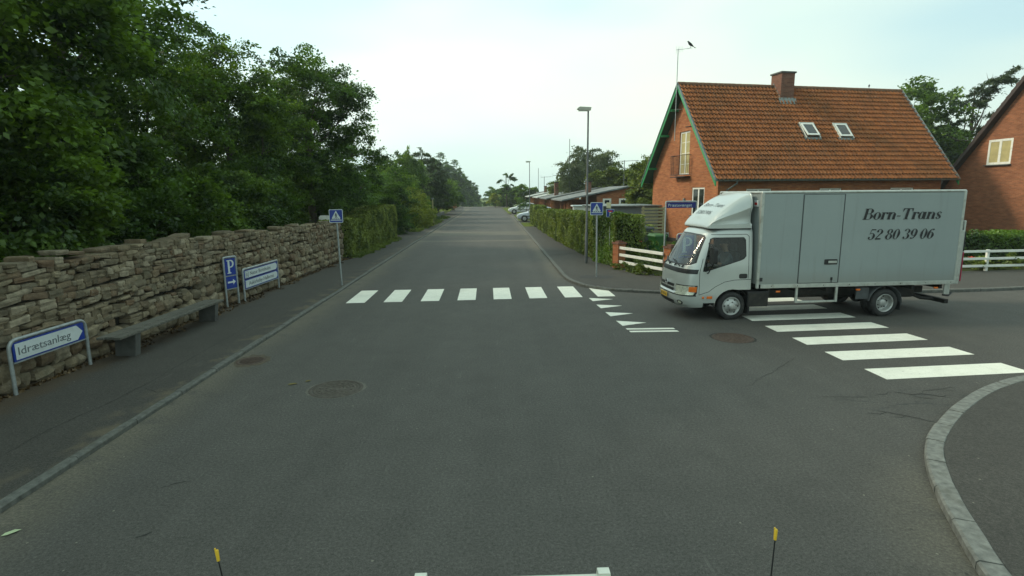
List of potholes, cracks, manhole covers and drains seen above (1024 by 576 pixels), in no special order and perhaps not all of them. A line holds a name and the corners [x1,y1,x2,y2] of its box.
manhole cover [305,380,367,399]
crack [872,387,950,422]
manhole cover [709,333,757,343]
